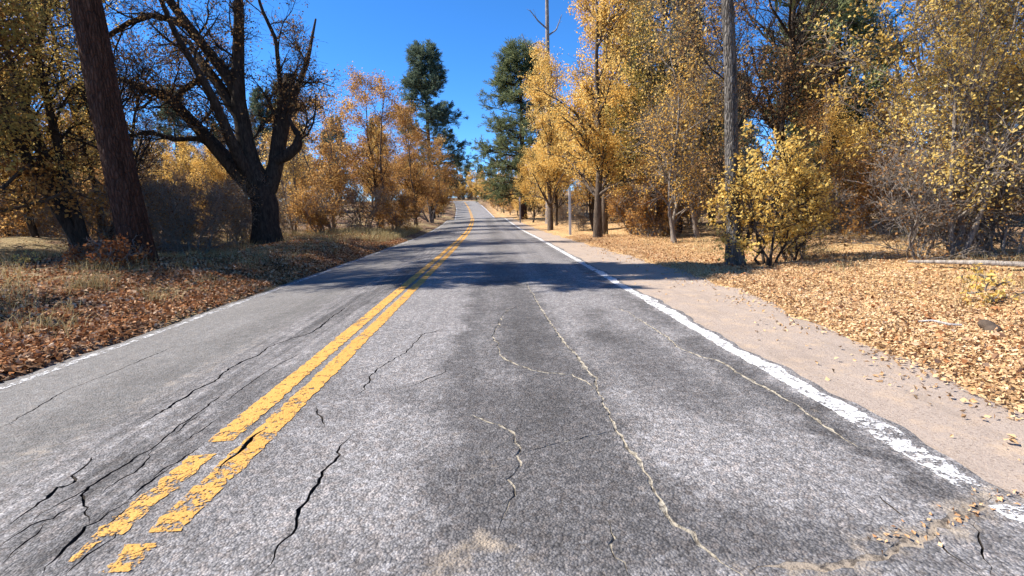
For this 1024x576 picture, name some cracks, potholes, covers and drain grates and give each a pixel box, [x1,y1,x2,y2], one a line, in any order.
crack [2,308,353,574]
crack [347,330,454,400]
crack [463,284,992,576]
